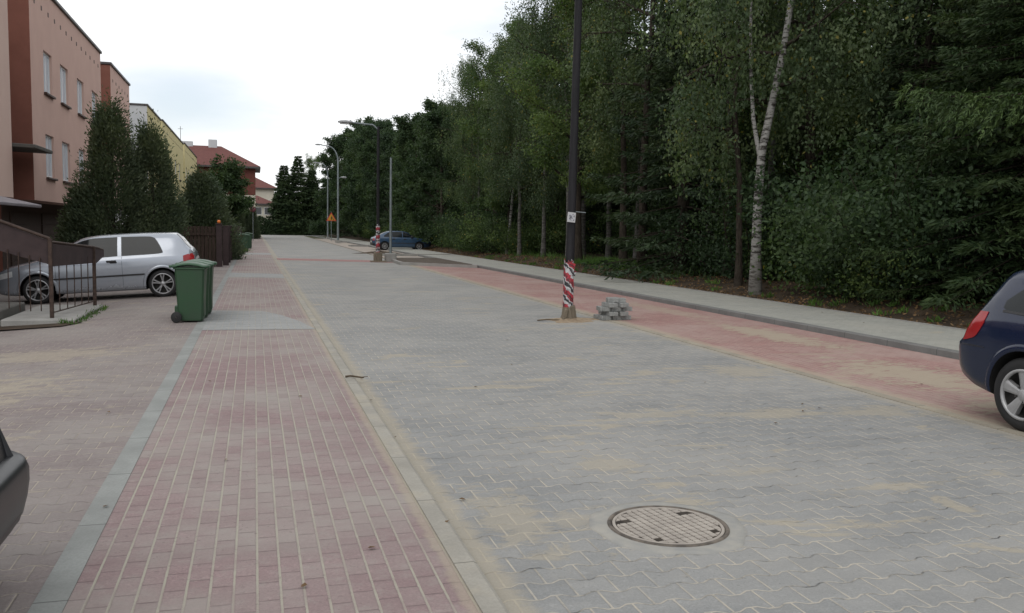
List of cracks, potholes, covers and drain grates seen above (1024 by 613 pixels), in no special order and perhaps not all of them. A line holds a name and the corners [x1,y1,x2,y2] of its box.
manhole cover [589,501,747,555]
